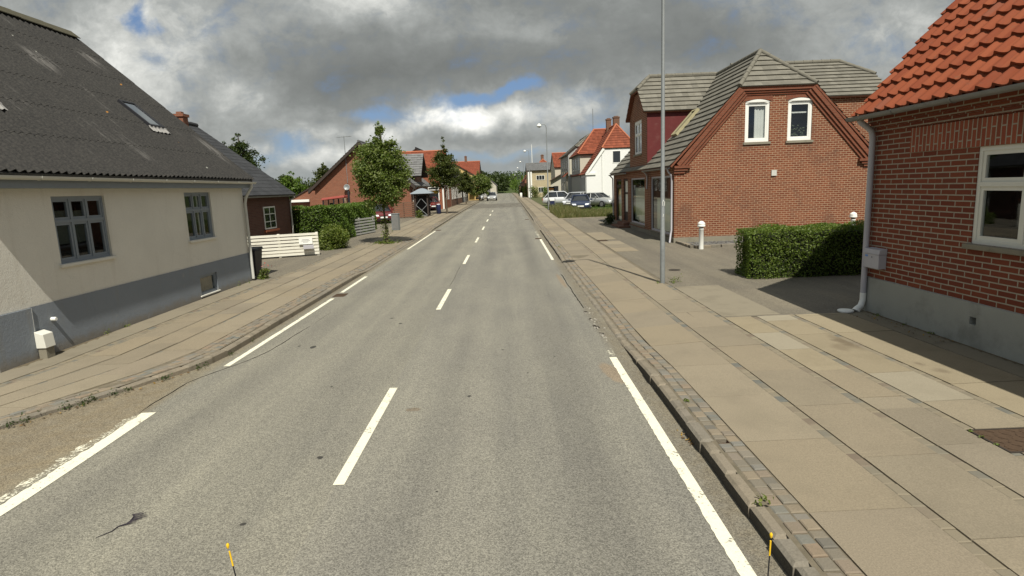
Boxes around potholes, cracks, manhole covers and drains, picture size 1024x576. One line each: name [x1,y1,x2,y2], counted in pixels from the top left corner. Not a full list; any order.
manhole cover [967,427,1024,454]
crack [141,316,325,412]
